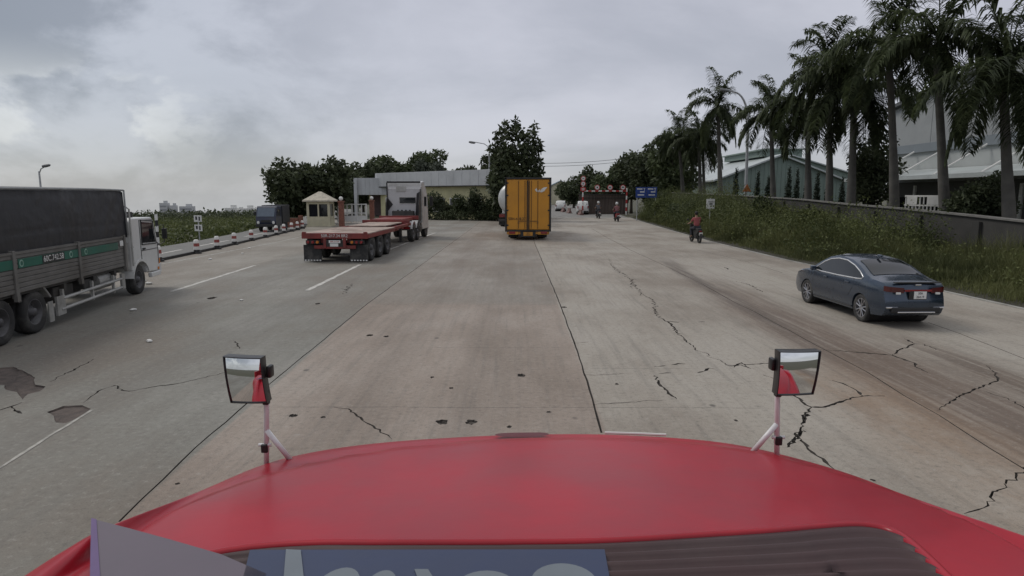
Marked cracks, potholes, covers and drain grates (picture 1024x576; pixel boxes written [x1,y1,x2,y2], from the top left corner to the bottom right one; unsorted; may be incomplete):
crack [939,365,1024,410]
pothole [0,367,45,399]
crack [335,407,392,439]
crack [86,373,221,401]
crack [964,467,1024,514]
pothole [48,405,90,423]
crack [594,265,871,469]
